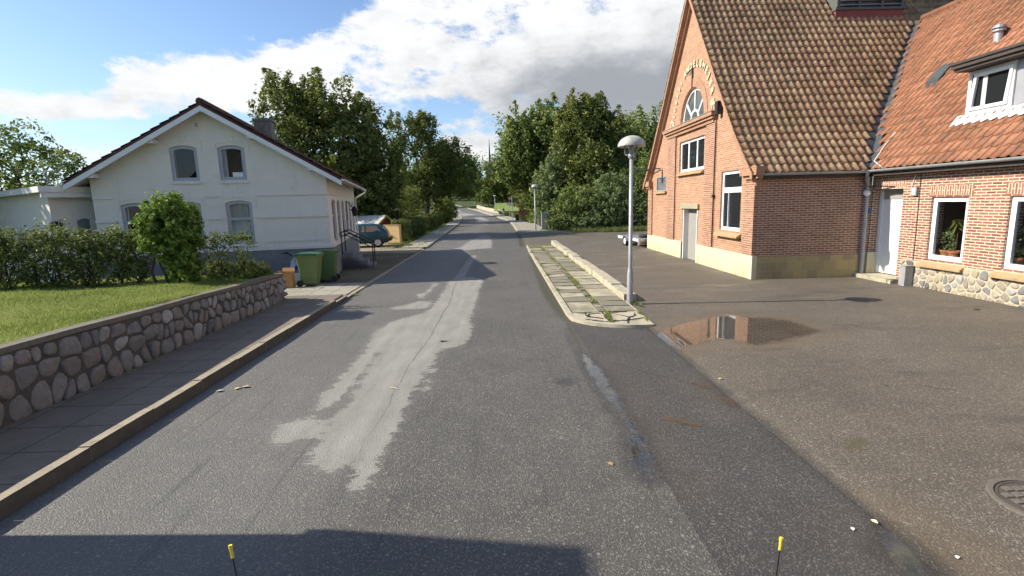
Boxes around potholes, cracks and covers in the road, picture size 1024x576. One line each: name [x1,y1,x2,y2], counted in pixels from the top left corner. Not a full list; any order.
manhole cover [986,478,1024,516]
